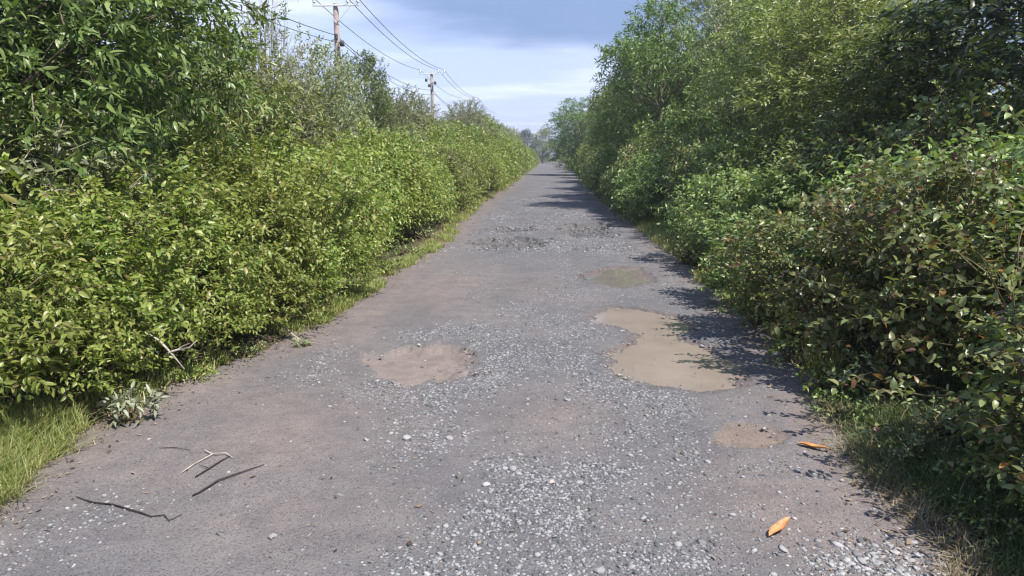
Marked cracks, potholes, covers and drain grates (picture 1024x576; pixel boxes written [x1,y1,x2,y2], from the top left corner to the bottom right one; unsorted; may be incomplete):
pothole [360,341,491,388]
pothole [554,222,623,238]
pothole [587,306,757,393]
pothole [578,265,659,289]
pothole [466,236,559,251]
pothole [711,422,795,448]
